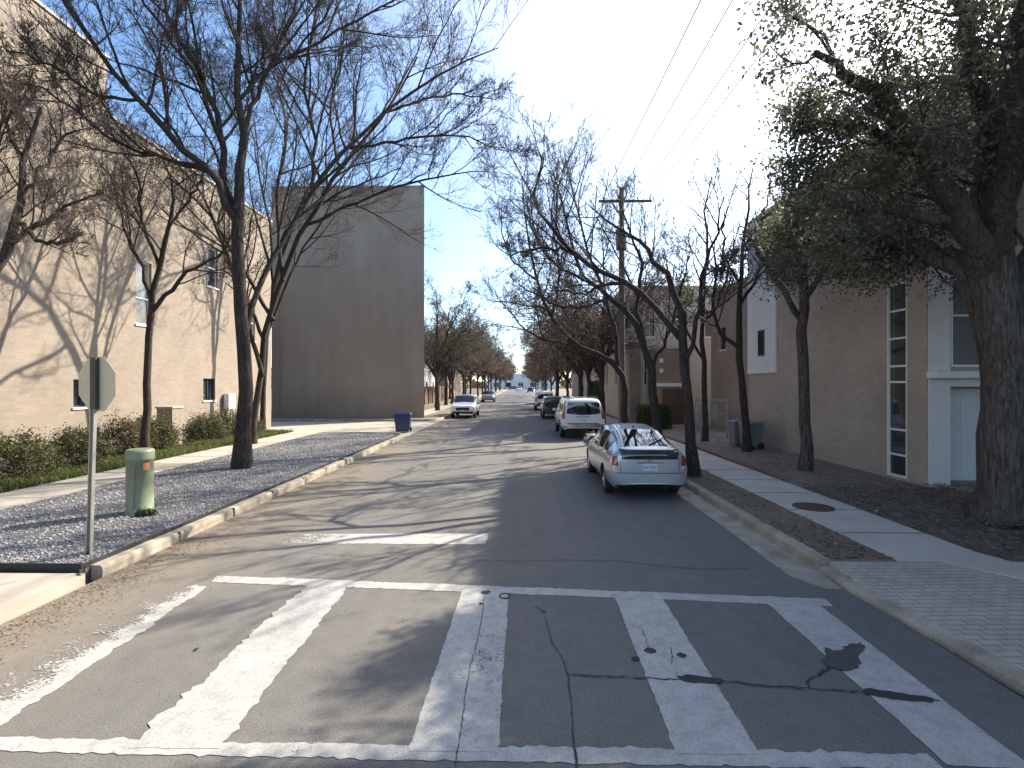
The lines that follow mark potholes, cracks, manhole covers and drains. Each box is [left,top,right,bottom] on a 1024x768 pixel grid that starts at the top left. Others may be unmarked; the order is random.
manhole cover [792,502,836,512]
crack [310,552,745,569]
crack [455,597,484,765]
